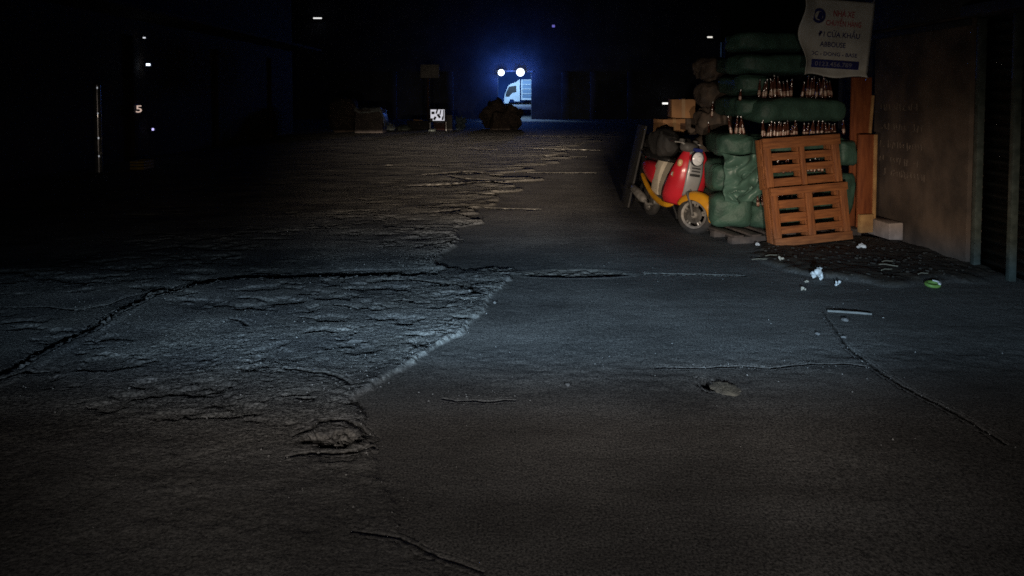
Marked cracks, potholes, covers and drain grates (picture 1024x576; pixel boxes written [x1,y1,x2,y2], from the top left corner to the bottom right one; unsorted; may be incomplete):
crack [656,312,1012,446]
crack [384,165,512,187]
crack [277,366,379,461]
pothole [292,428,375,453]
crack [348,527,488,576]
crack [374,238,466,249]
pothole [696,376,715,393]
crack [0,270,492,381]
